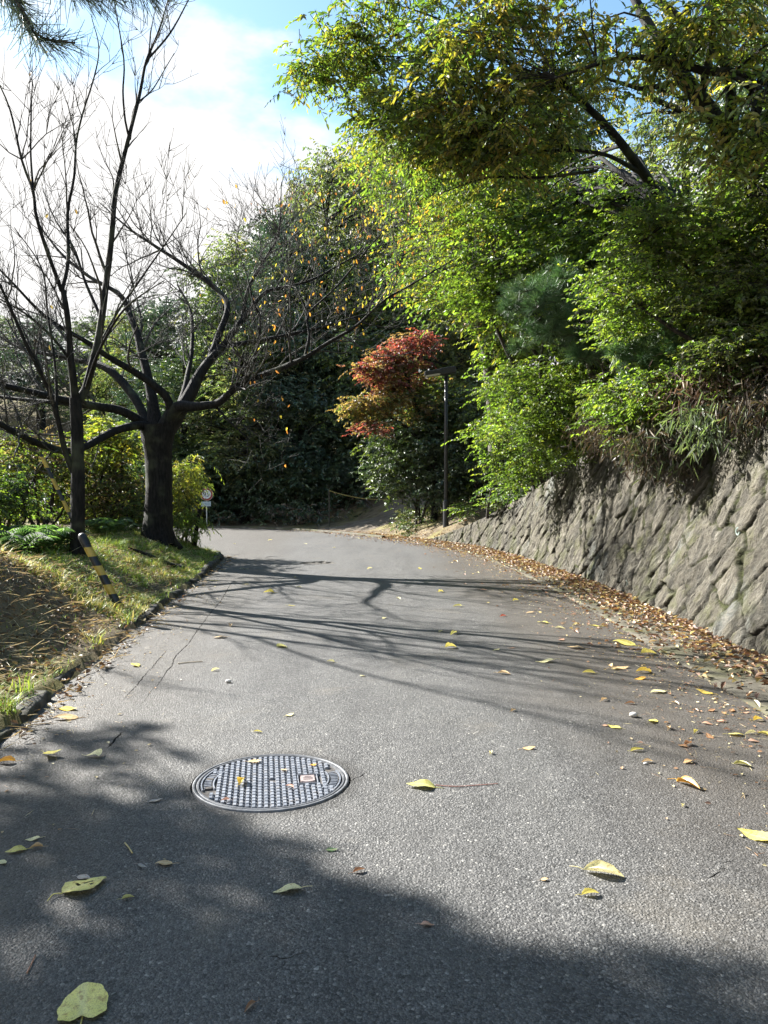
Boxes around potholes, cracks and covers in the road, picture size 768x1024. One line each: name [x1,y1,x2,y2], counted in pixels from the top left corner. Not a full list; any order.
crack [127,584,231,708]
manhole cover [192,754,349,813]
